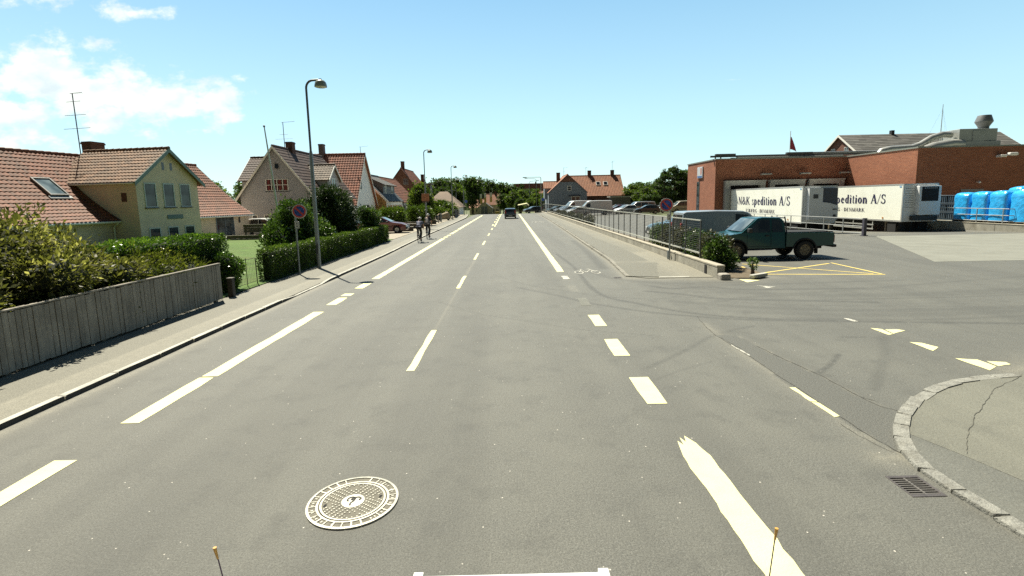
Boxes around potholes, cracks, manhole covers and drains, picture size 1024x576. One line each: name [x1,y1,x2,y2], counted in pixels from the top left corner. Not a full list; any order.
drain grate [885,475,948,497]
crack [966,375,1021,451]
manhole cover [305,477,399,530]
